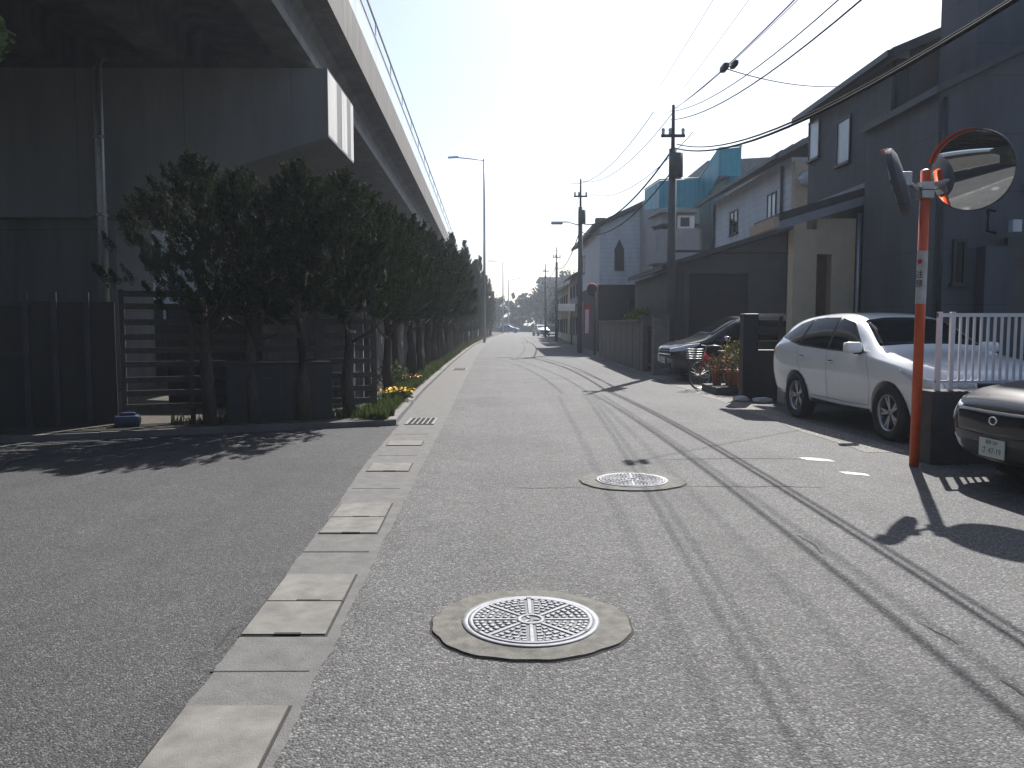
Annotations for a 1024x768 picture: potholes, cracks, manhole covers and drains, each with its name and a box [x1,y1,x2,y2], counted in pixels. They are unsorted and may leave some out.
manhole cover [579,471,687,492]
manhole cover [430,590,634,663]
crack [215,626,239,649]
